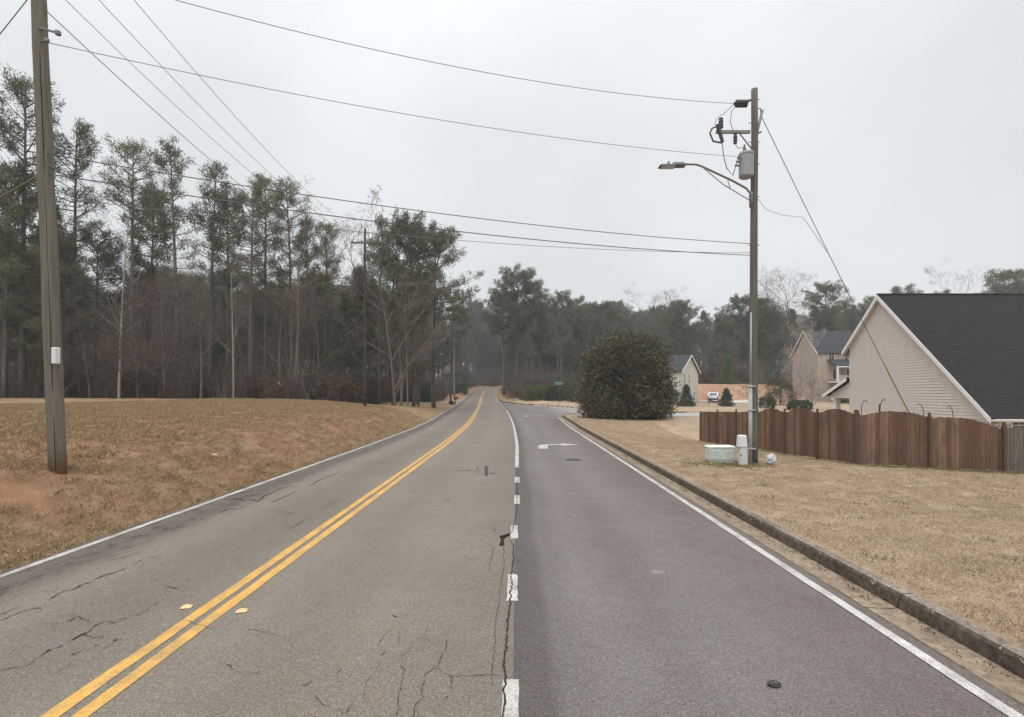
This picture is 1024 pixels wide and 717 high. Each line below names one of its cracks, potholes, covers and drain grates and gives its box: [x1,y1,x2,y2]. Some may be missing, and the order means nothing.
crack [300,465,519,717]
crack [0,553,174,675]
crack [217,473,337,528]
